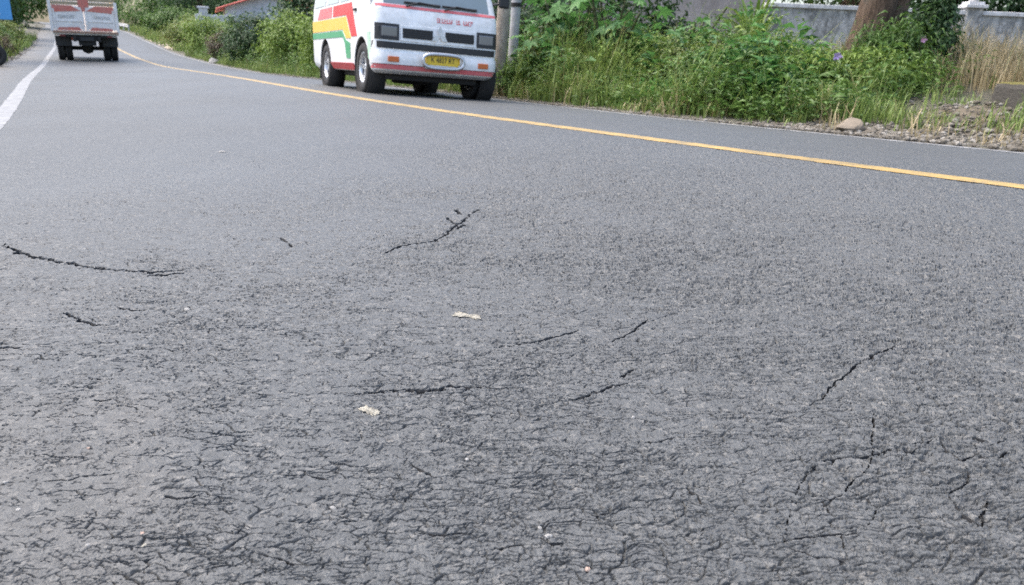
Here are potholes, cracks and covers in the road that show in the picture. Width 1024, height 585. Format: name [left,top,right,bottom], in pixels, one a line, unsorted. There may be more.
crack [561,370,634,401]
crack [822,346,895,400]
crack [64,308,145,326]
crack [386,210,479,253]
crack [356,385,514,395]
crack [4,244,185,277]
crack [508,331,577,347]
